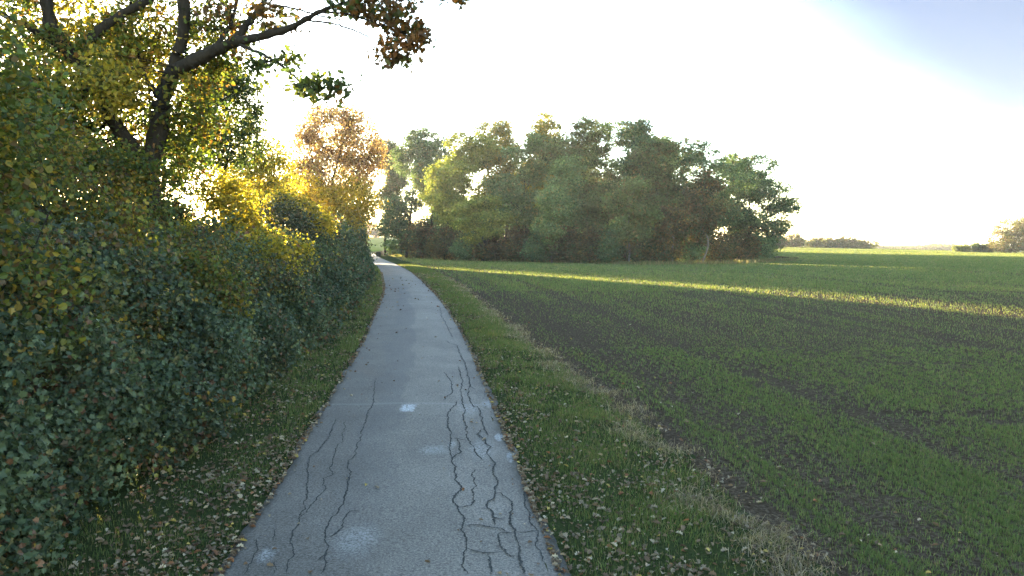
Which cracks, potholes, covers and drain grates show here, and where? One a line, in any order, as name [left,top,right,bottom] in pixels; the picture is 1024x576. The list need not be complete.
crack [444,342,544,574]
crack [244,381,376,574]
